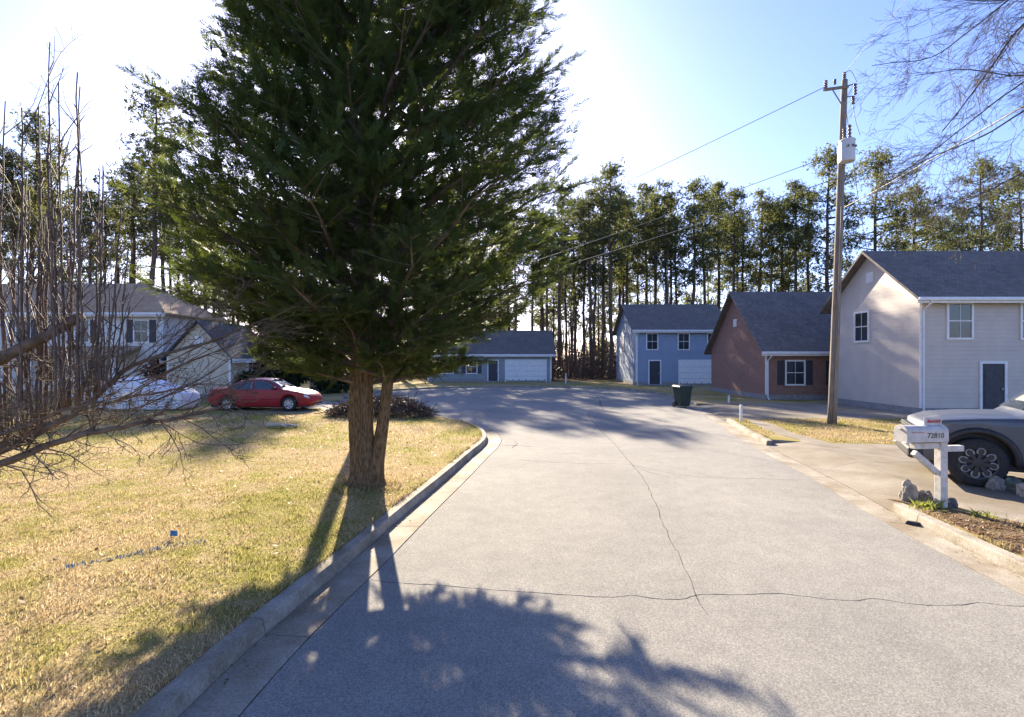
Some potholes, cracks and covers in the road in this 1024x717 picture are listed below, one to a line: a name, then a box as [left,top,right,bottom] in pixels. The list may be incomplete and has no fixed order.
crack [371,397,1009,616]
